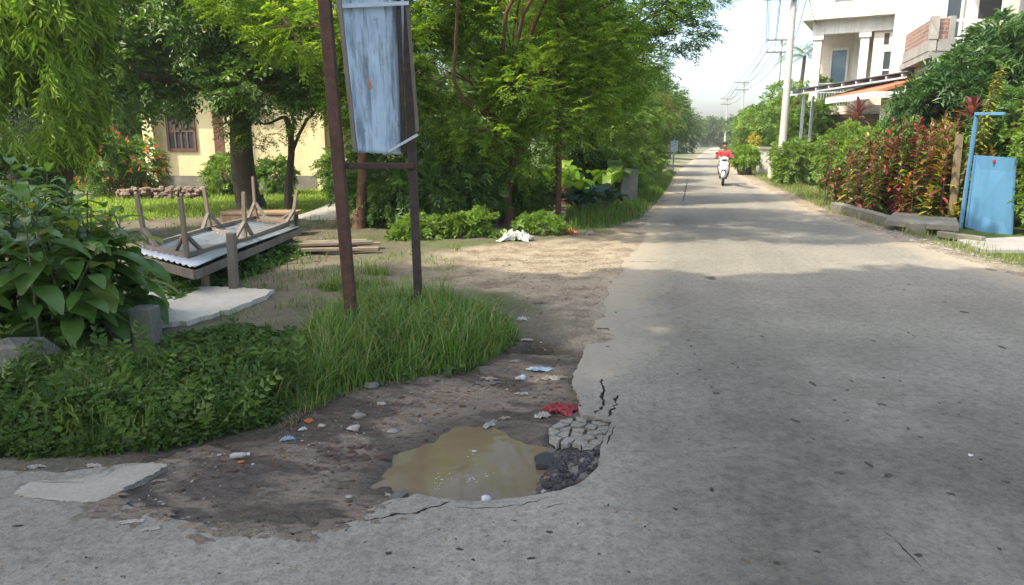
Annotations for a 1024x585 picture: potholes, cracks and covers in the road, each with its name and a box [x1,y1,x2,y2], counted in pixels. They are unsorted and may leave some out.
crack [594,376,619,445]
crack [337,499,568,524]
